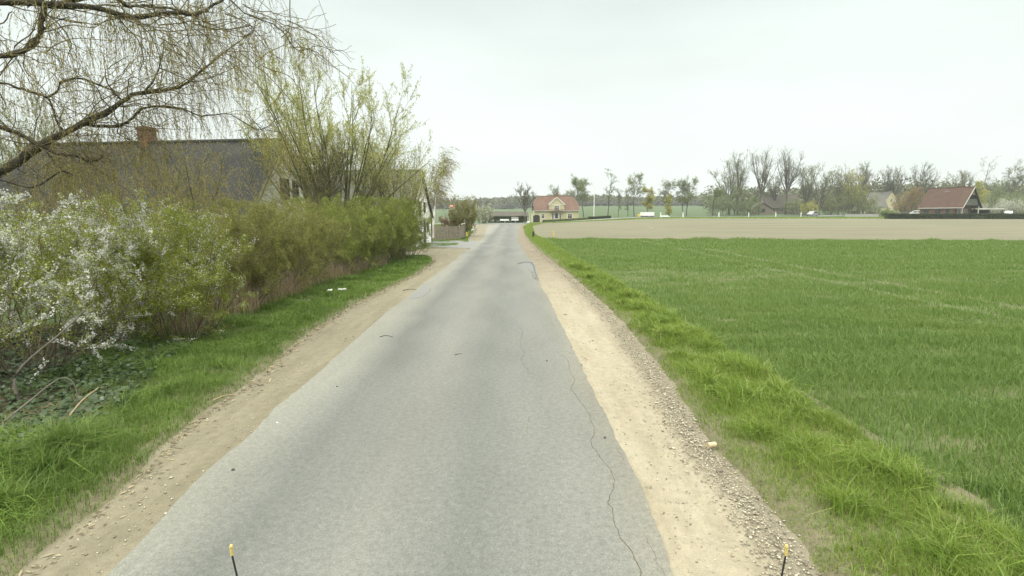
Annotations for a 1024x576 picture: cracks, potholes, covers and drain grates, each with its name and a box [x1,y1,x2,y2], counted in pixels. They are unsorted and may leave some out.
crack [563,351,666,576]
